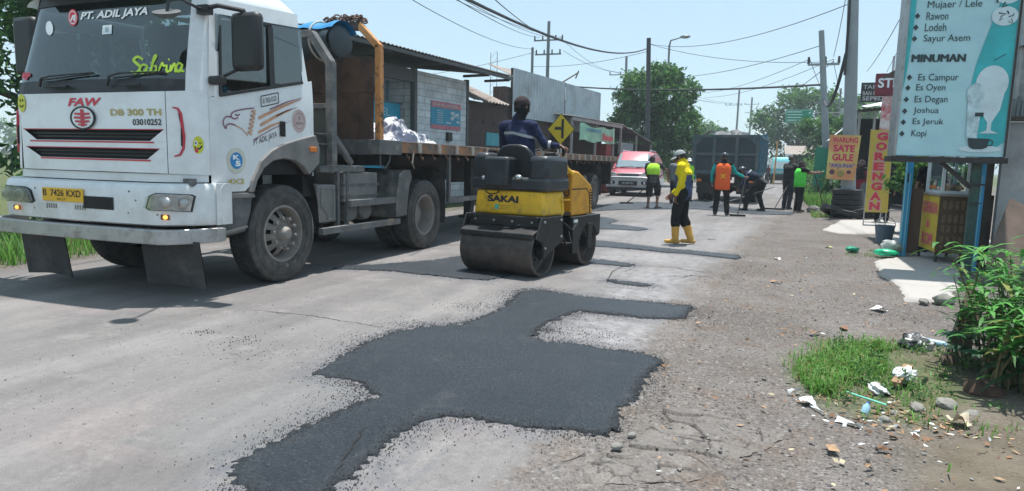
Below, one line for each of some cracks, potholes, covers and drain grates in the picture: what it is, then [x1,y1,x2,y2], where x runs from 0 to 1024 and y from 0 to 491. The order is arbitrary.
crack [562,407,782,490]
